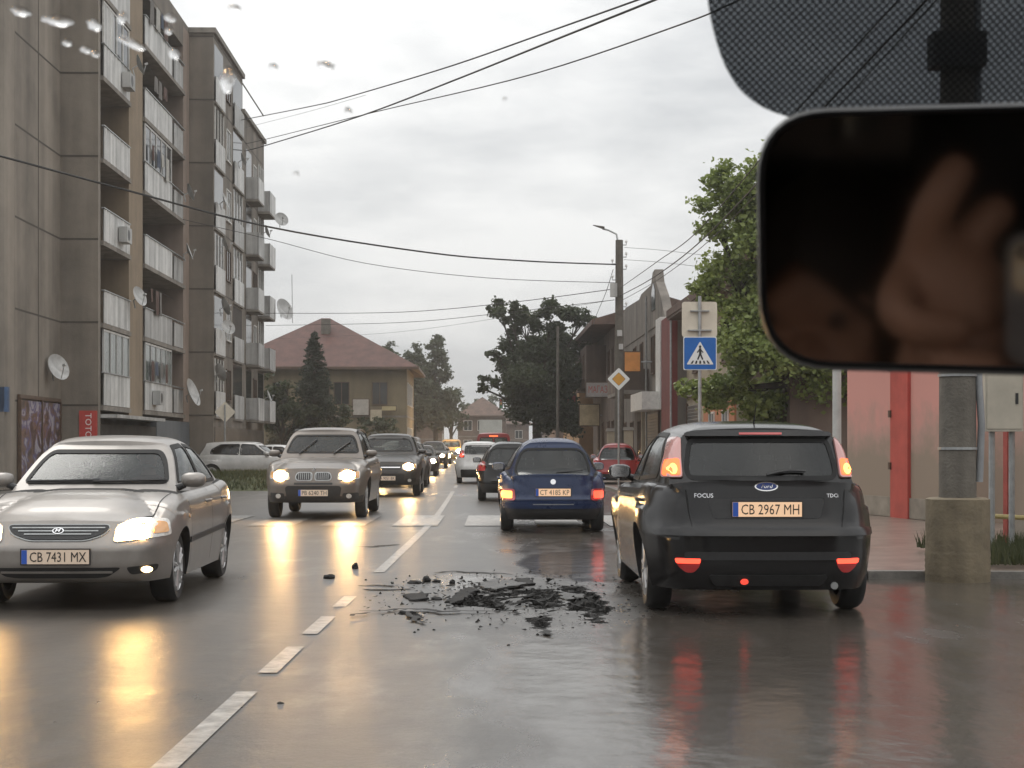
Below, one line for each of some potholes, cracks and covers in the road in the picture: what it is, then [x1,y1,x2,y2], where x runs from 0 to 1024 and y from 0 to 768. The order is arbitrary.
pothole [448,585,616,624]
pothole [524,615,552,629]
crack [350,608,468,623]
